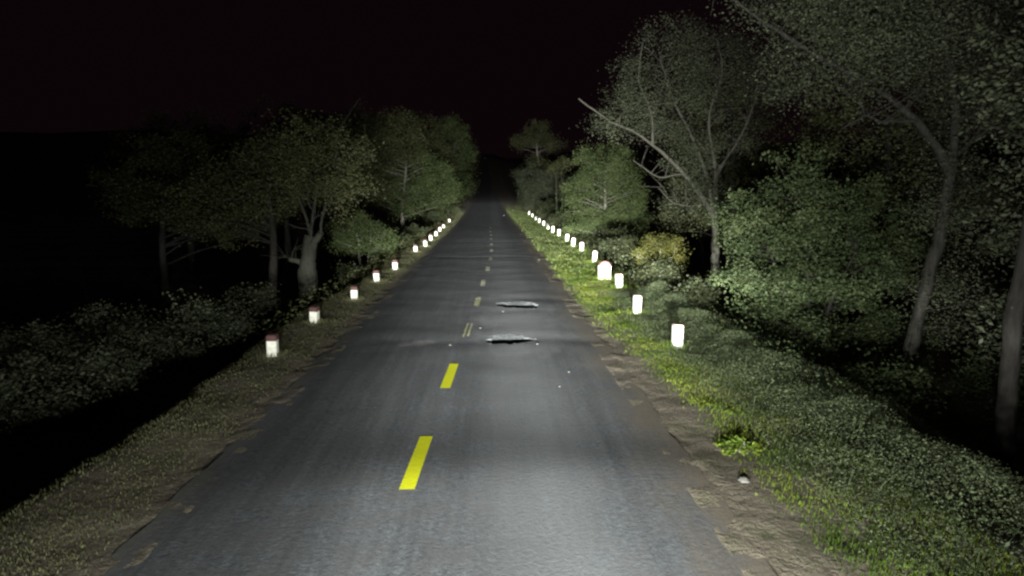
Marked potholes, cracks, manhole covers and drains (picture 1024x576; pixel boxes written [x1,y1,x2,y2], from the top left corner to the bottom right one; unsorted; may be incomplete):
pothole [495,300,539,309]
pothole [485,334,536,345]
